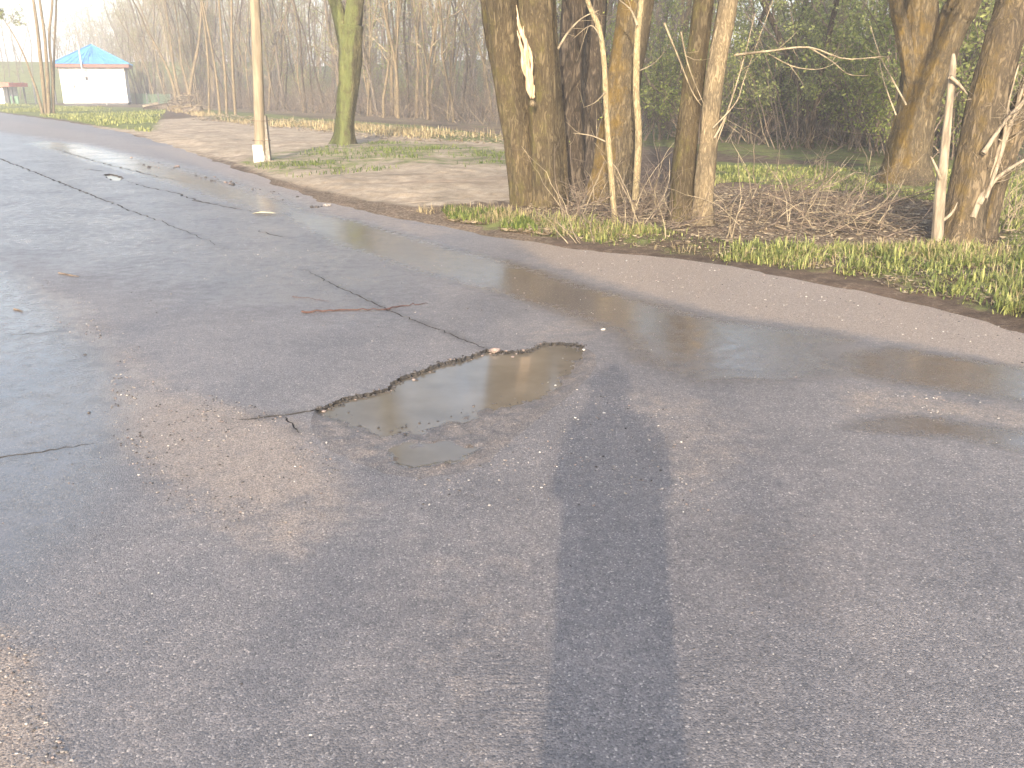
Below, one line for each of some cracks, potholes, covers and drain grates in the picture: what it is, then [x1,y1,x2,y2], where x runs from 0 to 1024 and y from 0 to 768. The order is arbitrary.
crack [239,409,314,433]
pothole [311,342,596,479]
crack [0,443,94,458]
crack [51,147,290,238]
